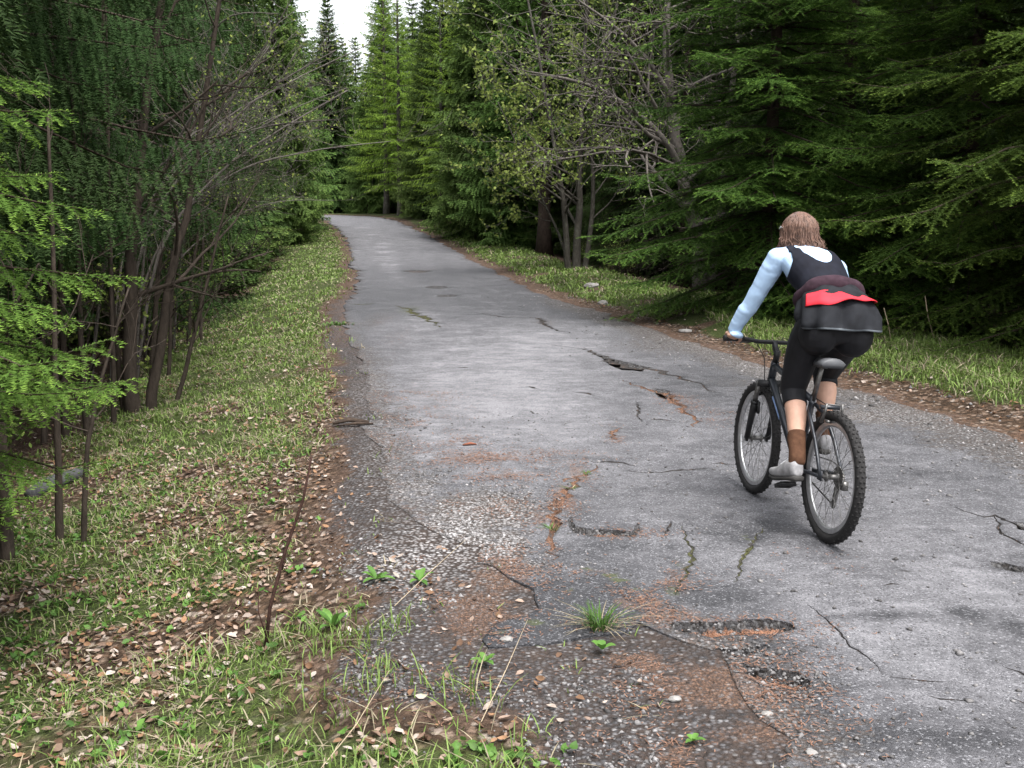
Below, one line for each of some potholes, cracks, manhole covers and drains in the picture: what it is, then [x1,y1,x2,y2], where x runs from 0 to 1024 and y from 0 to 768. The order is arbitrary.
crack [493,315,709,440]
crack [518,461,730,560]
pothole [670,619,795,637]
crack [664,521,696,595]
crack [356,304,440,327]
crack [960,509,1024,545]
crack [812,608,965,701]
crack [735,528,763,582]
